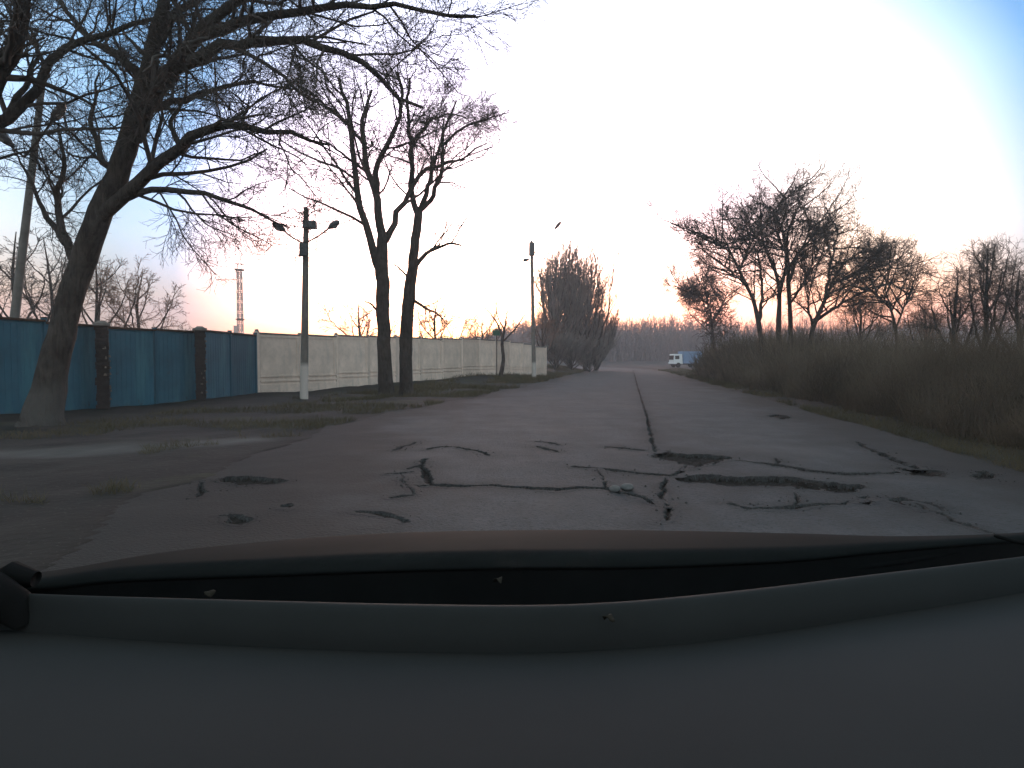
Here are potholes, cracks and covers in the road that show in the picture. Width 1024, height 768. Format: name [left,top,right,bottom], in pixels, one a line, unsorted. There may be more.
pothole [964,470,1004,481]
pothole [665,474,873,494]
crack [719,441,928,512]
pothole [208,513,262,527]
crack [345,441,695,525]
pothole [273,502,303,512]
pothole [214,475,293,488]
crack [902,501,1003,534]
pothole [645,449,739,471]
